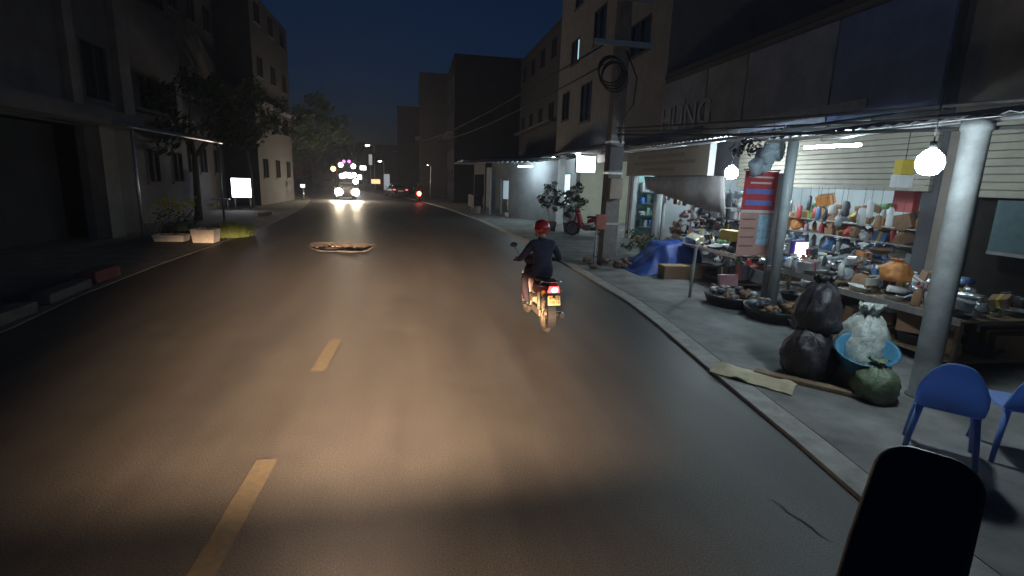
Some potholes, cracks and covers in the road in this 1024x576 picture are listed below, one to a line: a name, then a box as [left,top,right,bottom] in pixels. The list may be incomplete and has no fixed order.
pothole [308,242,375,252]
crack [771,499,830,541]
